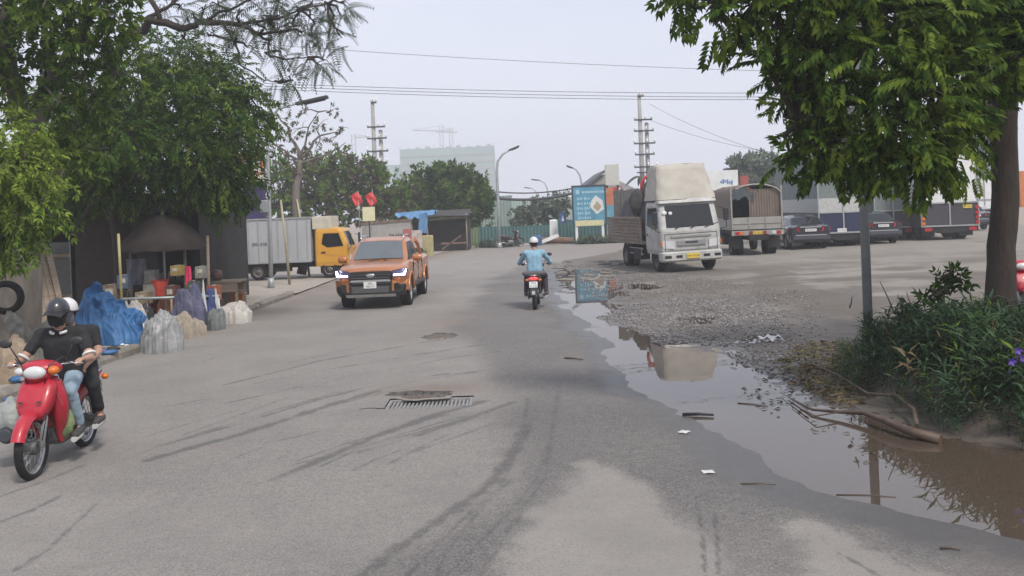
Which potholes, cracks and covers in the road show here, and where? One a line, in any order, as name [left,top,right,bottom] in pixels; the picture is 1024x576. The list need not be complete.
pothole [624,281,679,291]
pothole [671,313,724,326]
drain grate [385,397,473,409]
pothole [418,332,461,340]
pothole [379,390,460,402]
